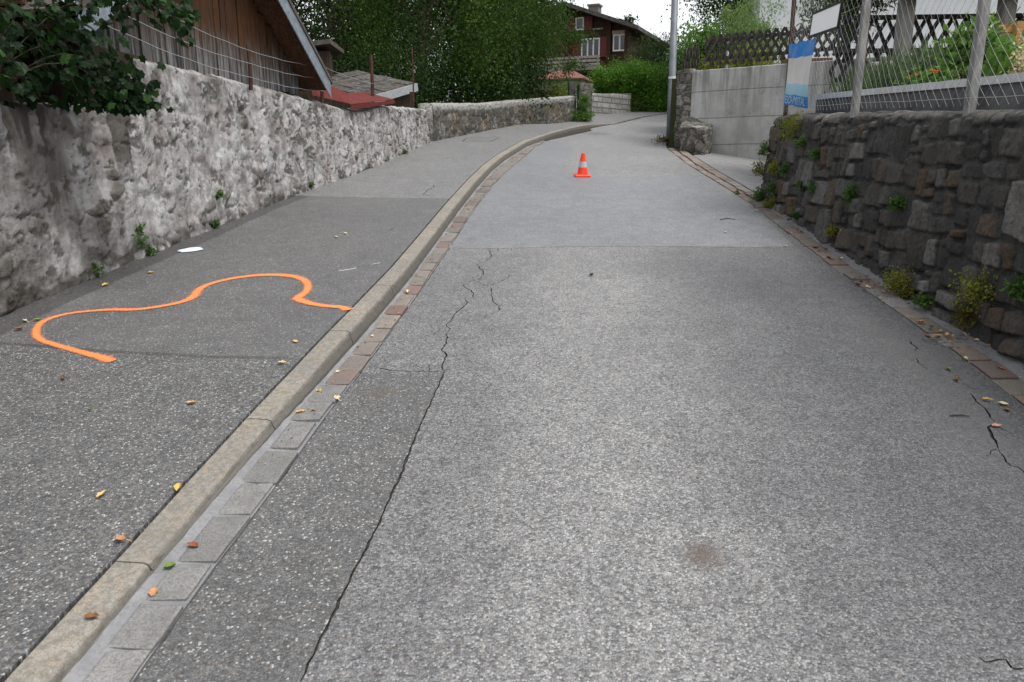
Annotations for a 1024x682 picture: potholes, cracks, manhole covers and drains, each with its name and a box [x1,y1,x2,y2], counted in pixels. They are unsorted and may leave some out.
crack [980,658,1024,670]
crack [963,383,1024,472]
